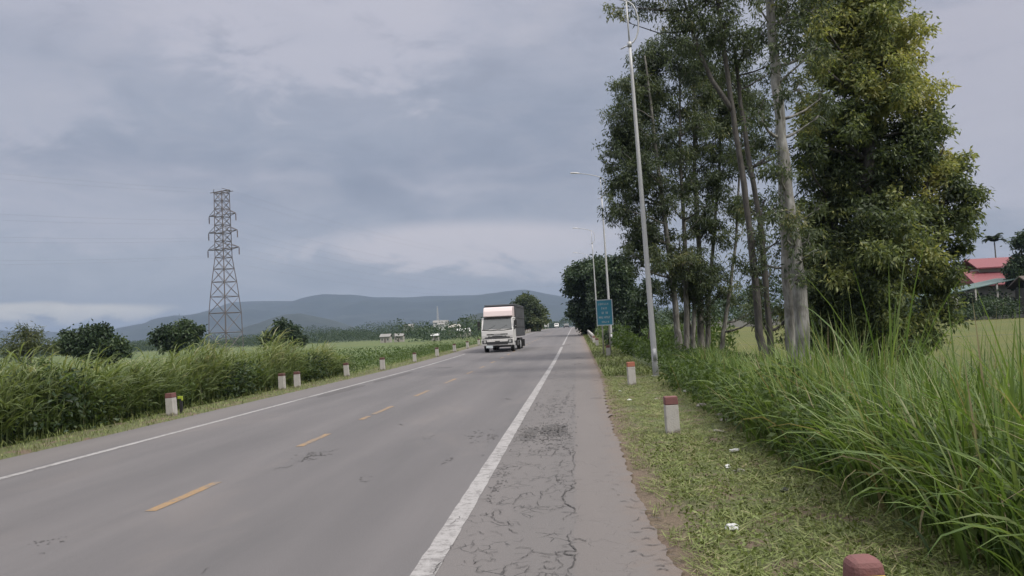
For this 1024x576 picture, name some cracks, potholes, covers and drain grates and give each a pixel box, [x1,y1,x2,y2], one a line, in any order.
crack [433,388,591,576]
